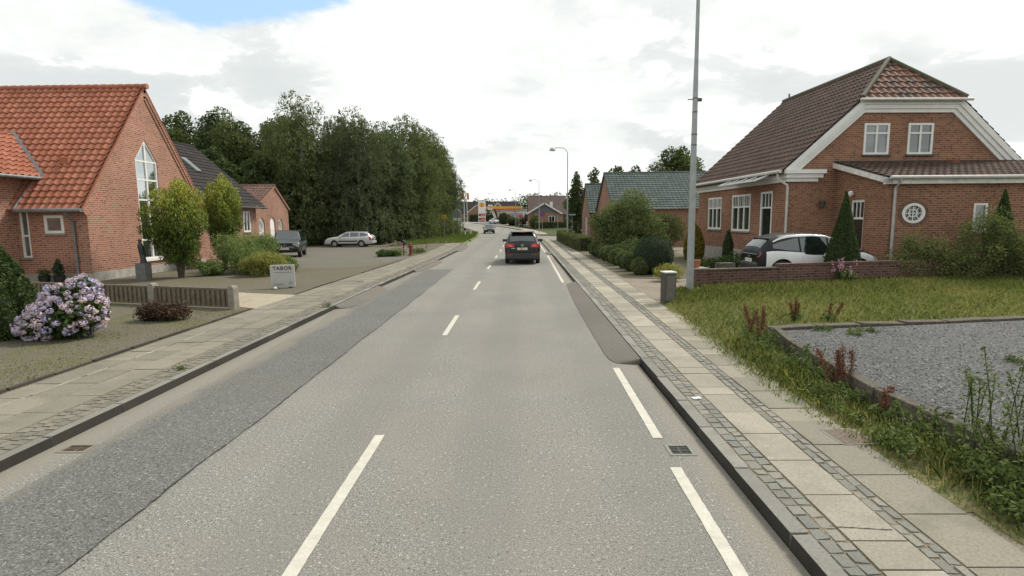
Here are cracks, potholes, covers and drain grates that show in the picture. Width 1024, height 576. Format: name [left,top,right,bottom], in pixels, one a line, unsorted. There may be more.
drain grate [664,444,697,456]
drain grate [54,444,99,453]
